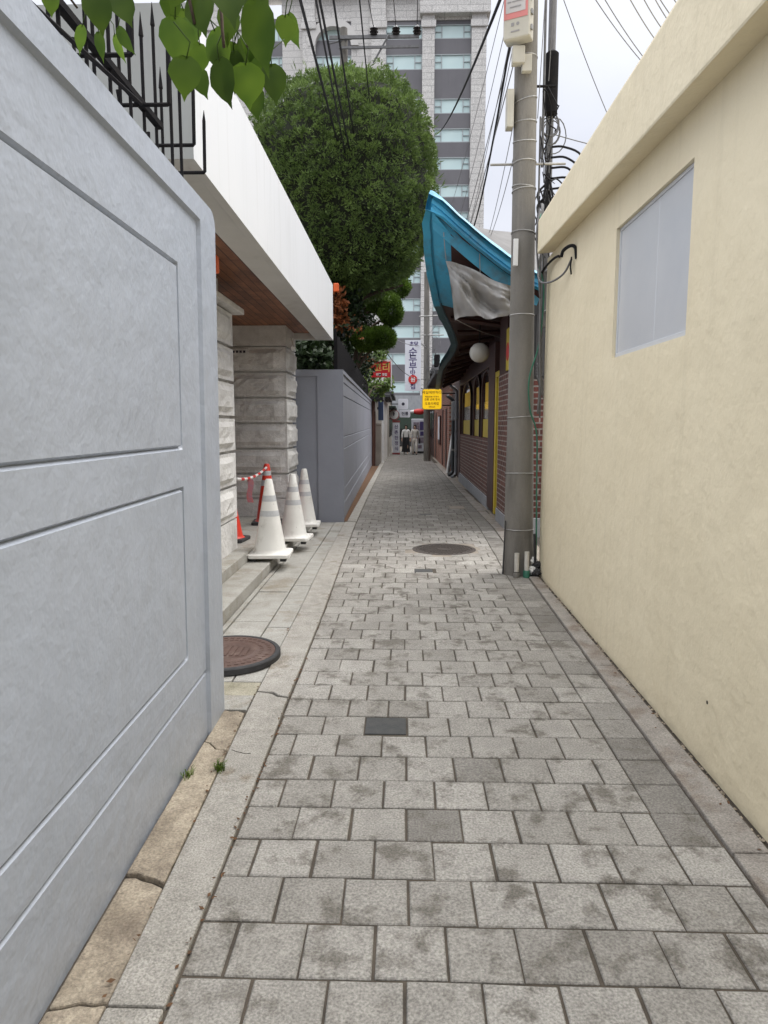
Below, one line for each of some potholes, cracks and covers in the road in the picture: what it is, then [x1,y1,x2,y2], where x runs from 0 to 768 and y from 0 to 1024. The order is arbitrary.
utility cover [365,718,406,735]
manhole cover [223,635,281,676]
manhole cover [412,544,476,555]
